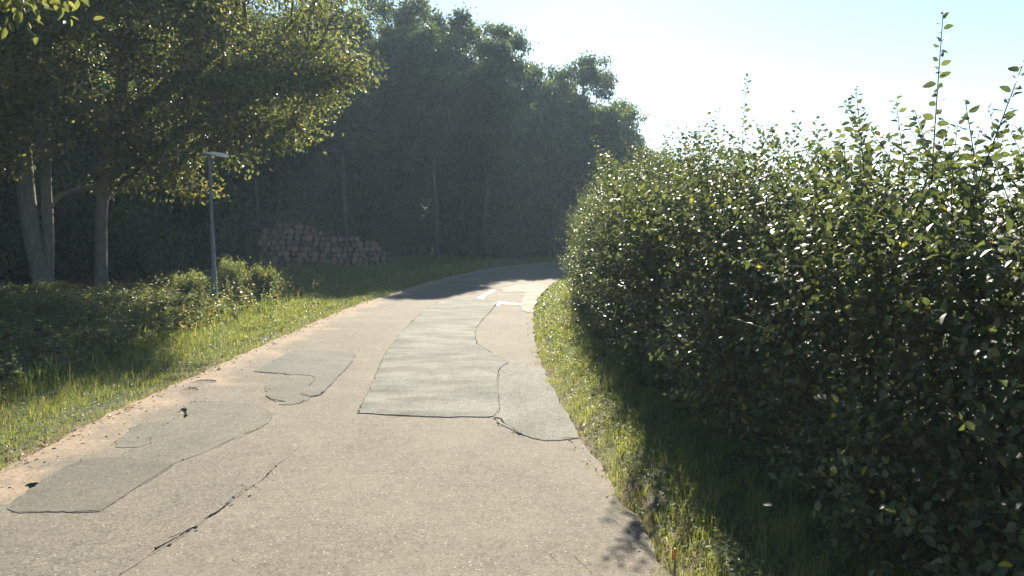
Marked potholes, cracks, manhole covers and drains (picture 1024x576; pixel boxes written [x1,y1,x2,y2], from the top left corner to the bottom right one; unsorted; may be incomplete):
crack [11,355,354,513]
crack [120,466,277,576]
